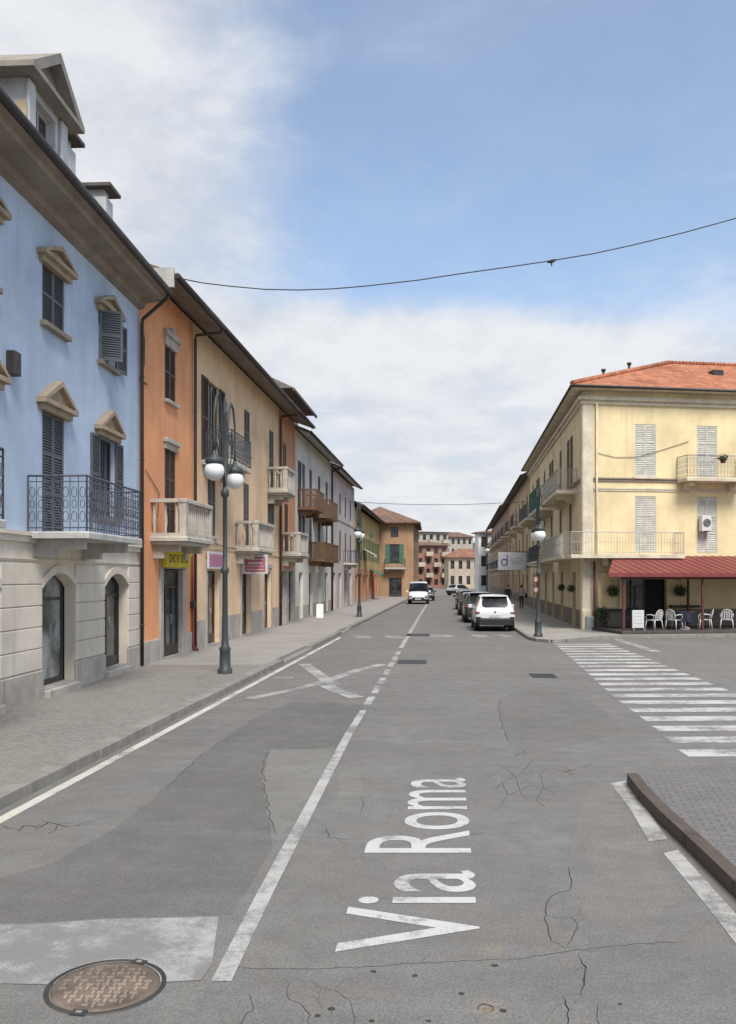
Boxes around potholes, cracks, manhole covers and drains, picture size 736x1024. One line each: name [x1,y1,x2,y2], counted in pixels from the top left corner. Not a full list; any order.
pothole [477,1003,494,1013]
crack [470,690,591,807]
manhole cover [43,958,167,1017]
crack [4,818,102,833]
crack [538,867,607,1024]
crack [261,748,320,833]
crack [241,976,382,1024]
